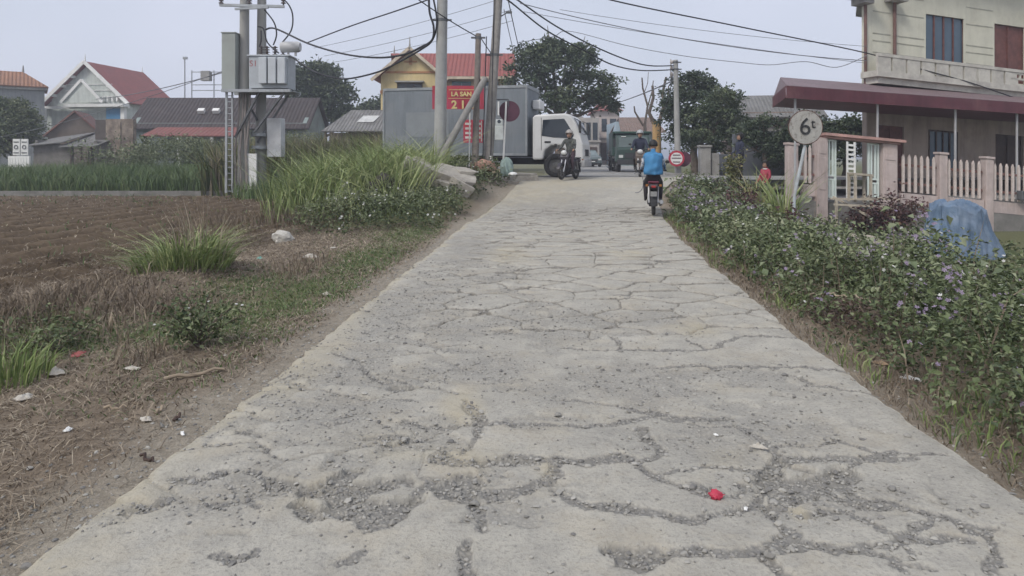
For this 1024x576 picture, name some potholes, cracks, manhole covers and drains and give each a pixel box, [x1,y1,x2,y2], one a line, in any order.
crack [119,206,1007,576]
pothole [749,459,865,507]
pothole [599,541,667,574]
pothole [262,467,427,533]
